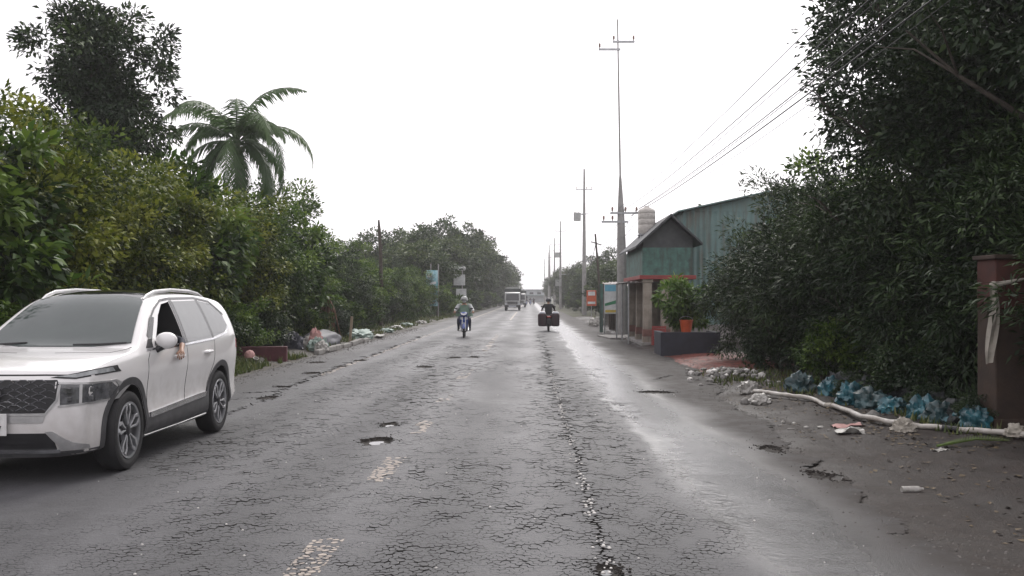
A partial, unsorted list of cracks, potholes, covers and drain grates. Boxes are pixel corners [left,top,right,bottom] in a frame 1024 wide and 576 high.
crack [0,335,760,576]
pothole [800,466,848,482]
pothole [749,442,789,455]
pothole [353,434,402,447]
